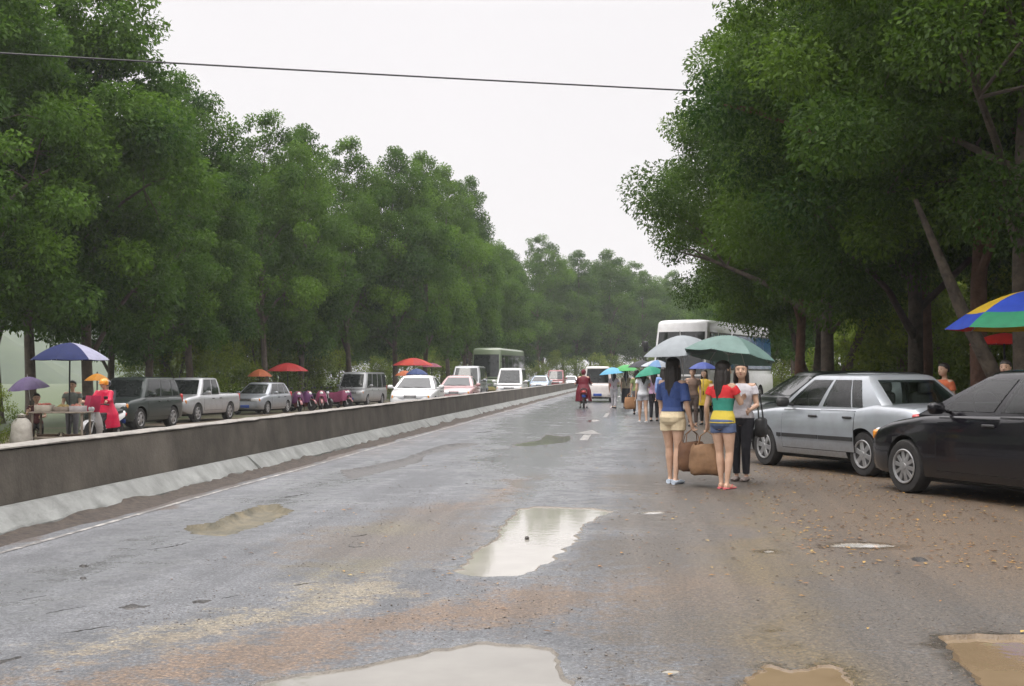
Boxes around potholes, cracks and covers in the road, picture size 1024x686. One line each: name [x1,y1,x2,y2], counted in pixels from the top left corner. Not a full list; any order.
pothole [453,506,614,577]
pothole [938,633,1024,686]
pothole [741,664,854,686]
pothole [511,434,573,446]
pothole [184,504,295,536]
pothole [254,641,576,686]
